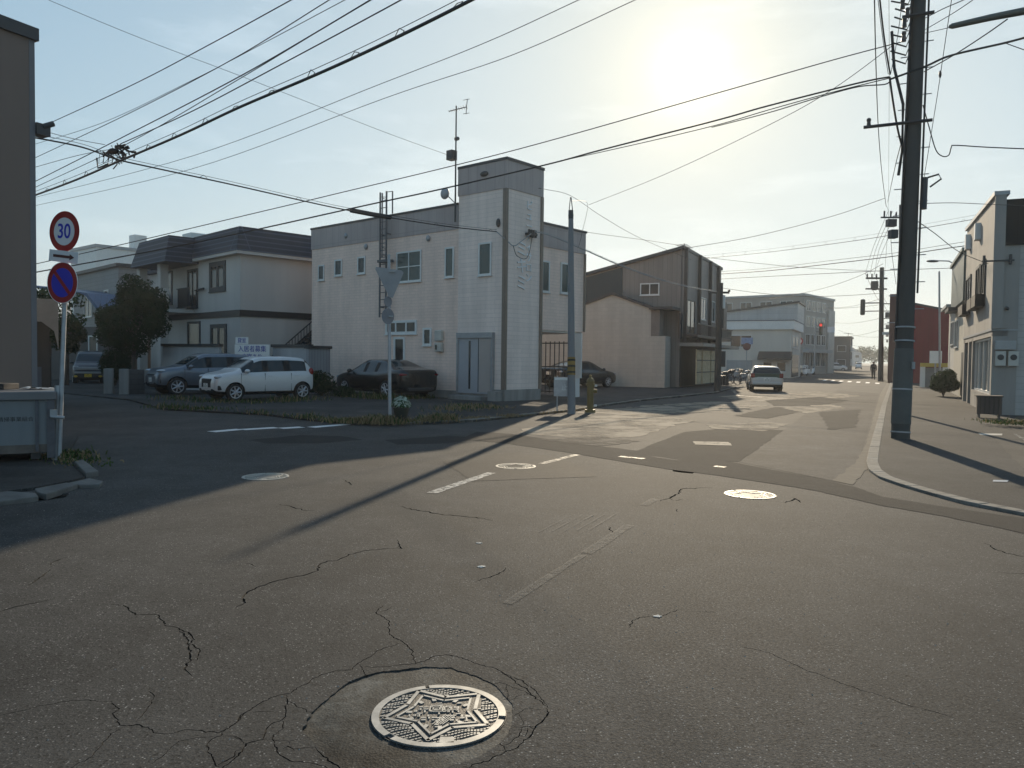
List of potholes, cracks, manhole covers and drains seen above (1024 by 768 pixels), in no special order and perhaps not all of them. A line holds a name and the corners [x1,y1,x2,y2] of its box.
crack [736,645,956,719]
crack [3,606,549,768]
crack [237,540,402,607]
manhole cover [724,490,777,499]
manhole cover [370,685,507,749]
crack [0,559,61,612]
